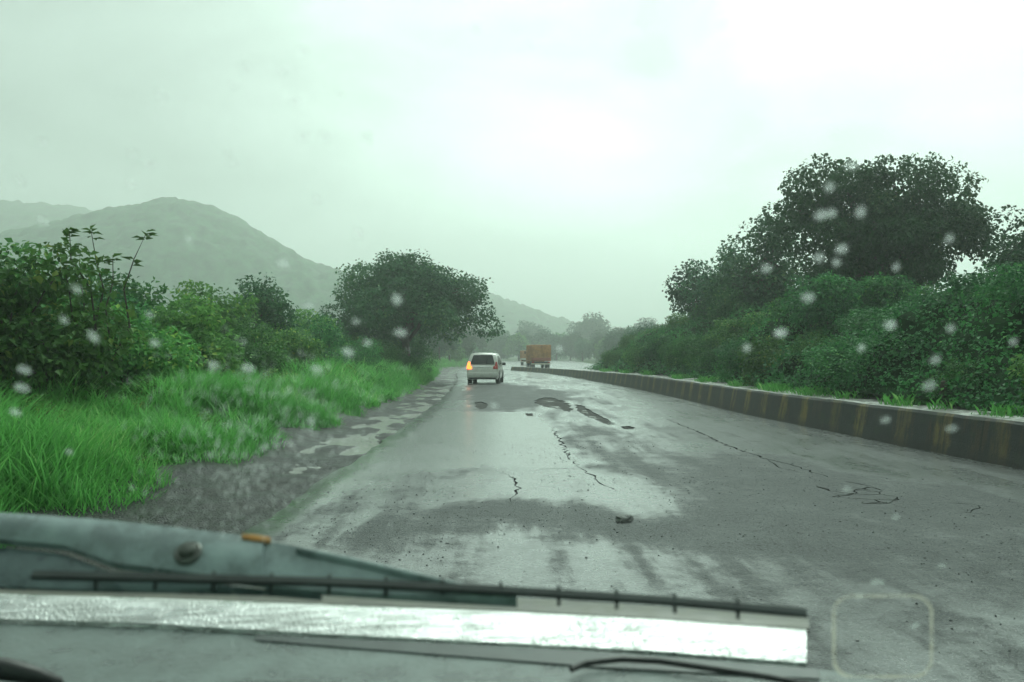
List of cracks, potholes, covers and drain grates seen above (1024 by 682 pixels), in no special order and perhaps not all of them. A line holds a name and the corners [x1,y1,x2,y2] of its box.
pothole [575,405,615,425]
crack [552,430,614,489]
crack [504,473,522,502]
pothole [534,397,573,412]
crack [664,418,899,506]
